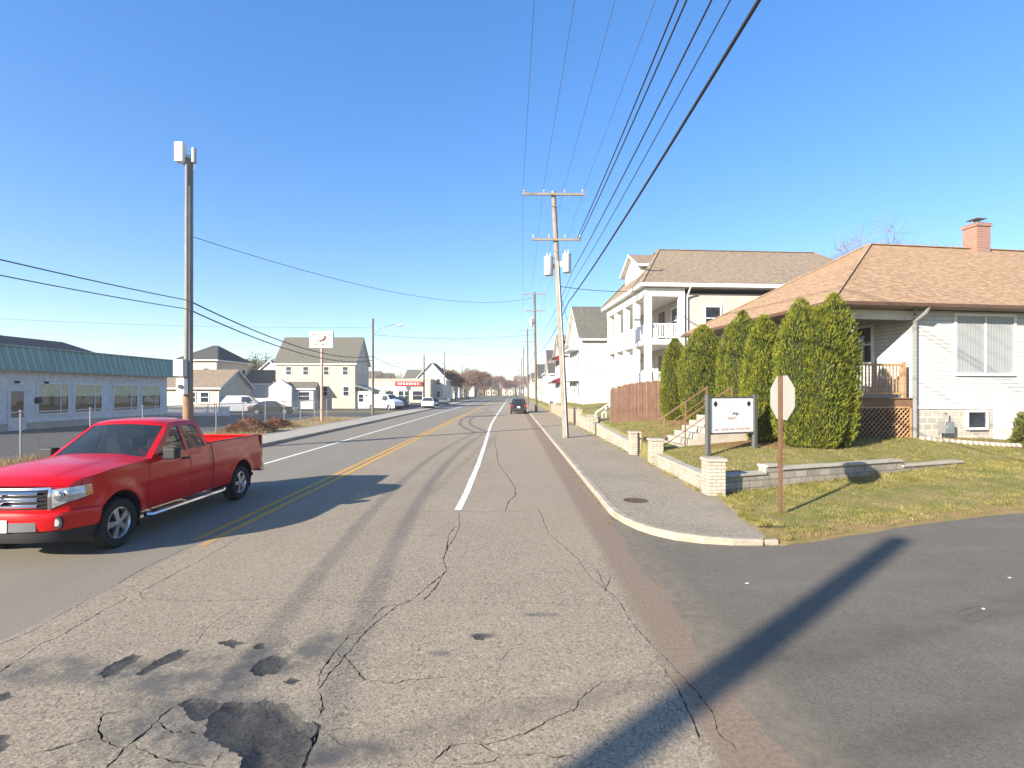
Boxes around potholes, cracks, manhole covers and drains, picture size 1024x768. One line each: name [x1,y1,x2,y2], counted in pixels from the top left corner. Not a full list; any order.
pothole [203,699,320,768]
pothole [98,653,141,679]
pothole [217,639,245,648]
pothole [135,649,190,675]
pothole [249,655,288,677]
crack [0,439,580,768]
crack [538,510,739,752]
